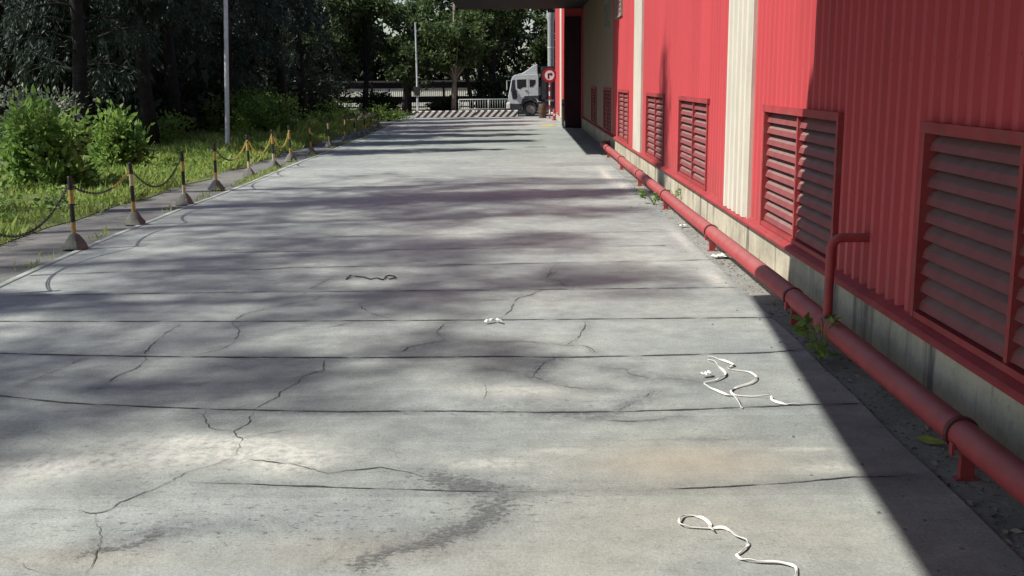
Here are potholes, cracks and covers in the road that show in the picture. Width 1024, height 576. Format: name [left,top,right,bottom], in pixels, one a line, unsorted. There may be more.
crack [101,326,178,388]
crack [484,324,697,421]
crack [29,458,229,569]
crack [203,360,324,451]
